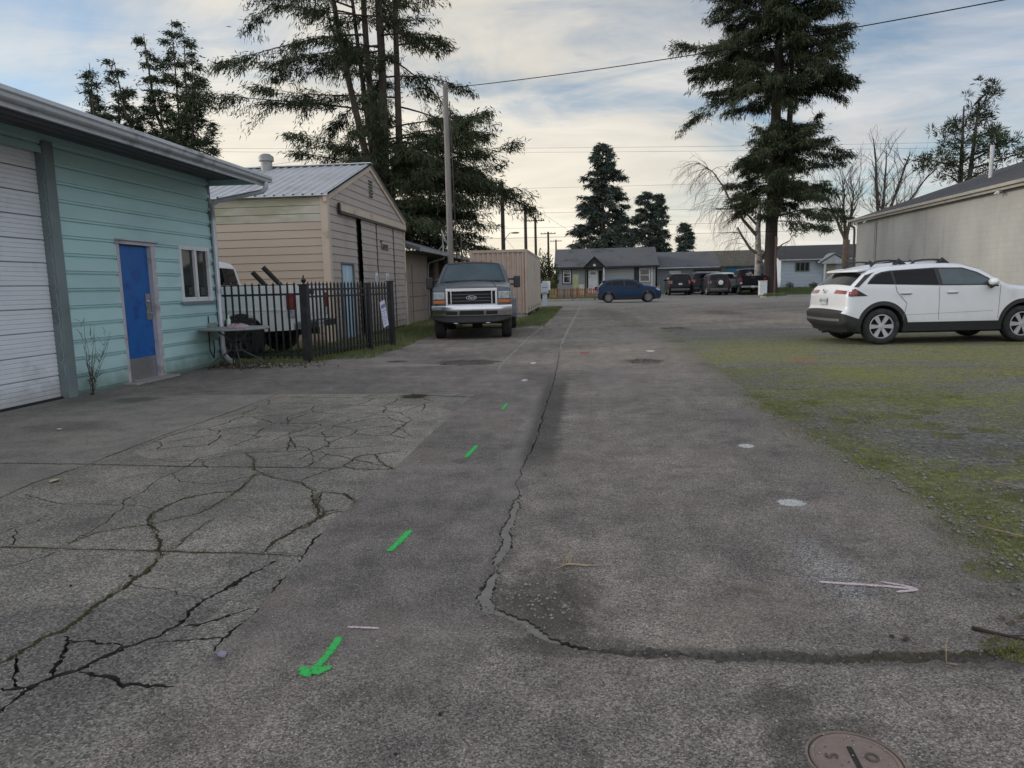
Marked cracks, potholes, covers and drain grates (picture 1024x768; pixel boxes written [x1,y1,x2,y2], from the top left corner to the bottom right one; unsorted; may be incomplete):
manhole cover [805,730,909,768]
crack [475,353,1014,665]
crack [0,393,461,713]
